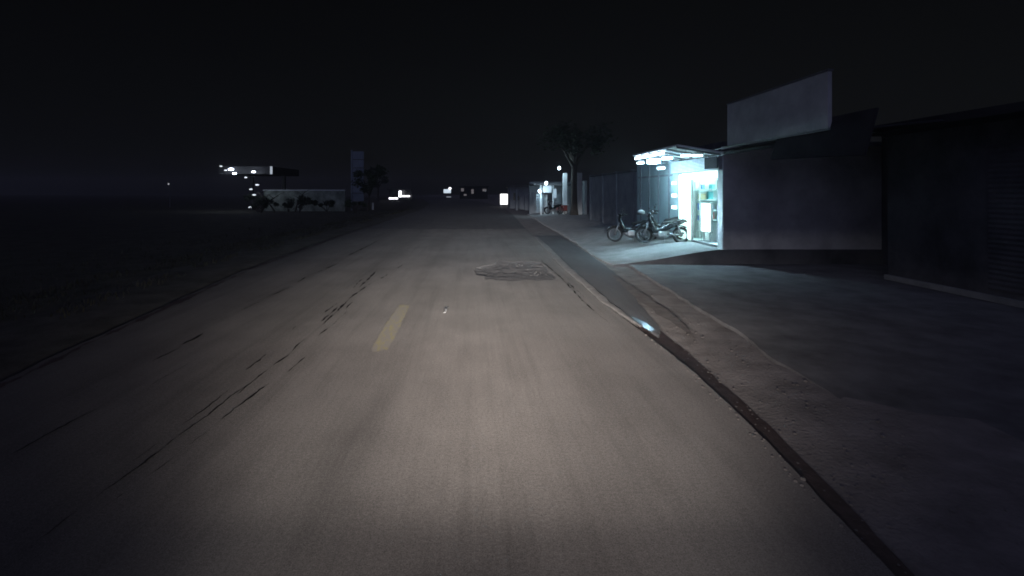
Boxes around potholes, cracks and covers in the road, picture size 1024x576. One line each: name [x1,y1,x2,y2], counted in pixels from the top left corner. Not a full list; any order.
crack [542,261,607,321]
crack [10,241,403,539]
